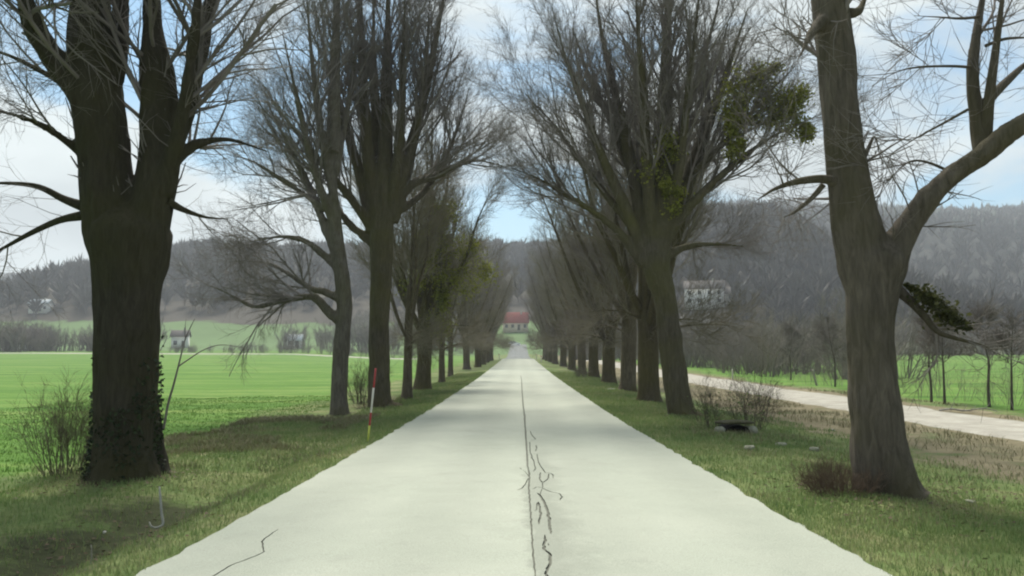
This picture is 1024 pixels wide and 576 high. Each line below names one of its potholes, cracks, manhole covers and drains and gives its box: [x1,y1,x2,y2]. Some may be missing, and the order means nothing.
crack [529,431,562,576]
crack [214,530,277,576]
